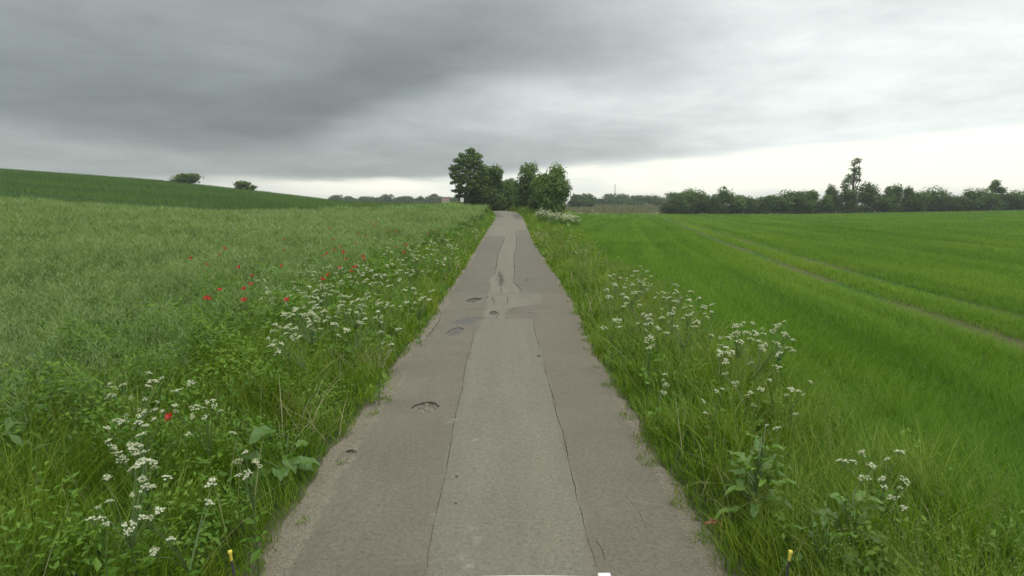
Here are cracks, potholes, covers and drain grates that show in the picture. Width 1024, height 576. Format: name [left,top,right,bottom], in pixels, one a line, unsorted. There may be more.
crack [427,237,540,564]
crack [544,364,605,565]
pothole [411,401,439,413]
